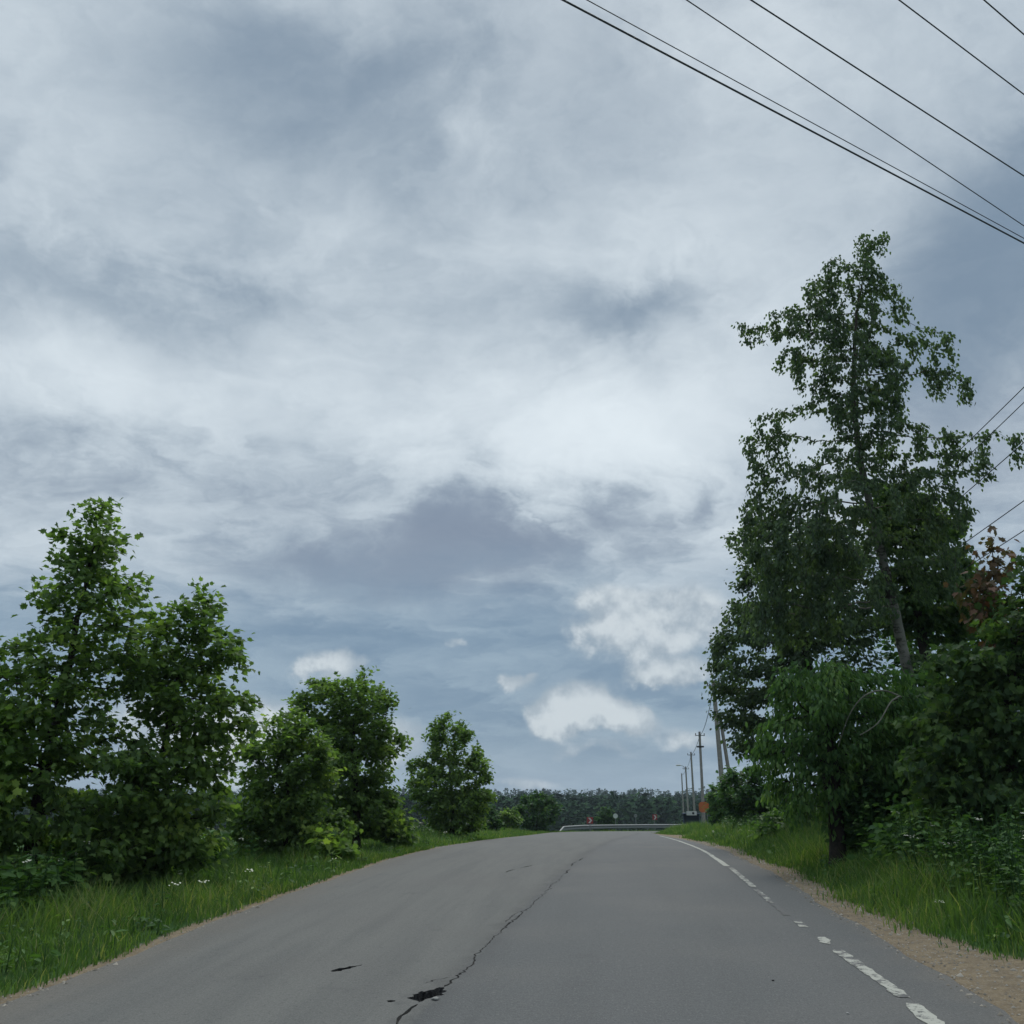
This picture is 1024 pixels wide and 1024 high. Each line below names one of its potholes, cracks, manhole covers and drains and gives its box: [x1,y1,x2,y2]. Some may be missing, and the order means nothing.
pothole [408,987,446,1005]
crack [396,859,581,1024]
